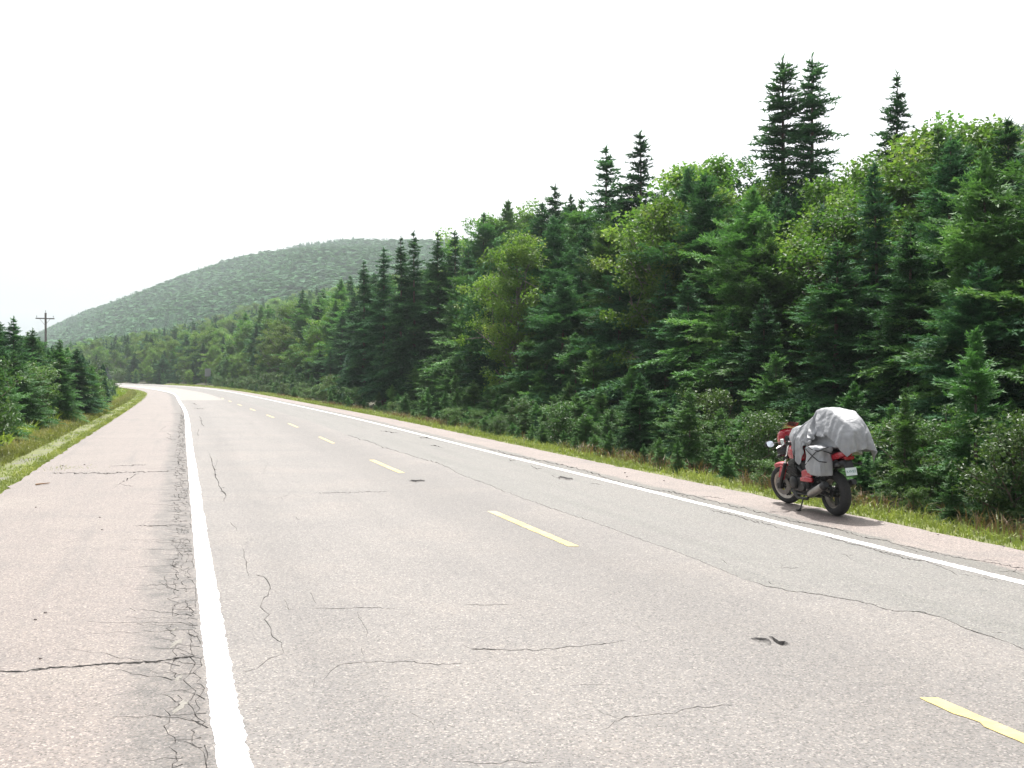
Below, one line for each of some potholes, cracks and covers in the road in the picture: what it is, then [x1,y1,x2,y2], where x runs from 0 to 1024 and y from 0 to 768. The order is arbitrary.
crack [231,524,293,673]
crack [348,431,1023,649]
crack [598,704,734,730]
crack [312,596,622,686]
crack [0,403,209,768]
